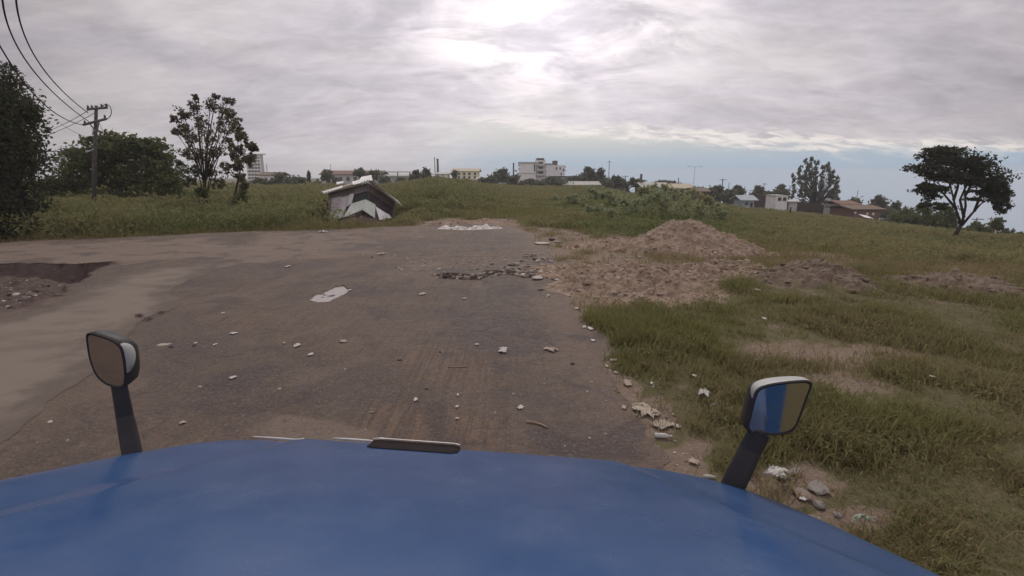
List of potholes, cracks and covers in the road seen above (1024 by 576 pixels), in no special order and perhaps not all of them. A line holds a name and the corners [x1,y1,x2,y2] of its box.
pothole [430,270,550,281]
pothole [0,261,121,312]
